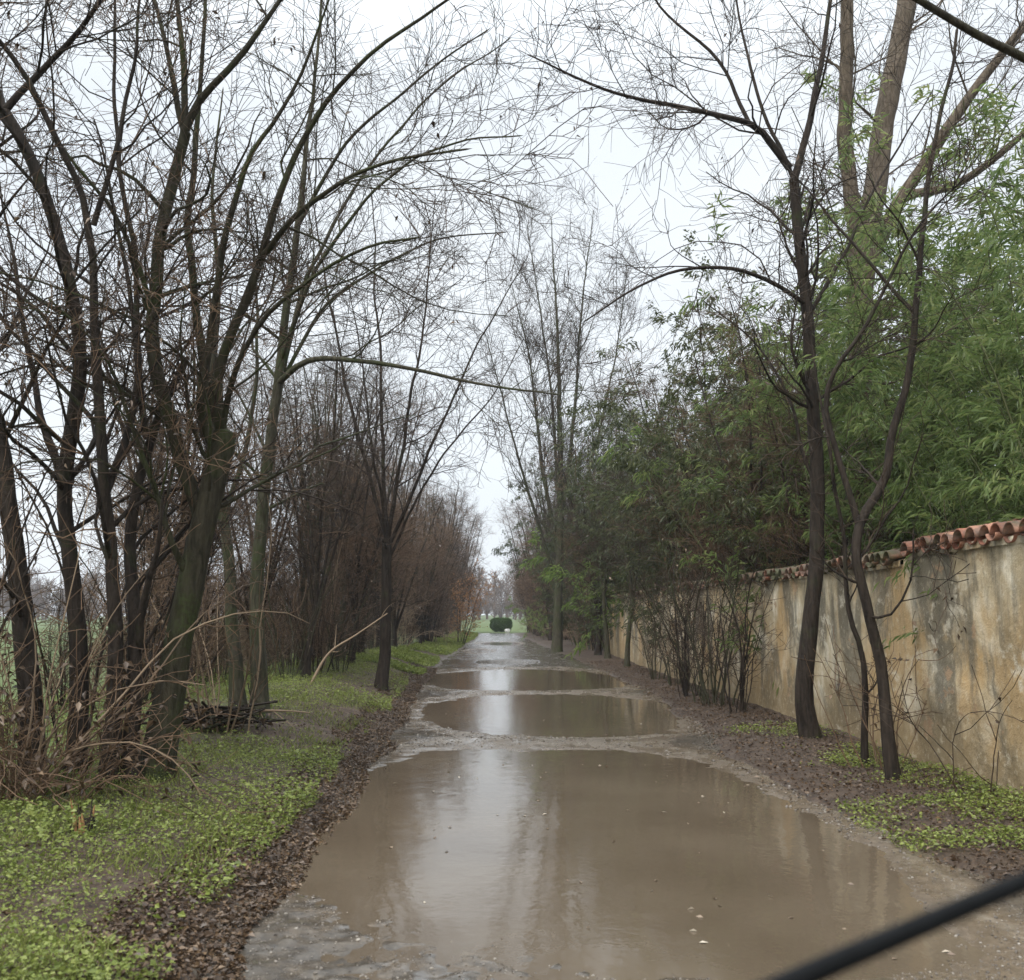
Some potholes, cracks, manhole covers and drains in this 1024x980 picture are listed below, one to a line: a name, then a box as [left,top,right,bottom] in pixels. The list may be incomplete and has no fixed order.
pothole [195,739,1024,980]
pothole [413,667,637,693]
pothole [403,691,703,740]
